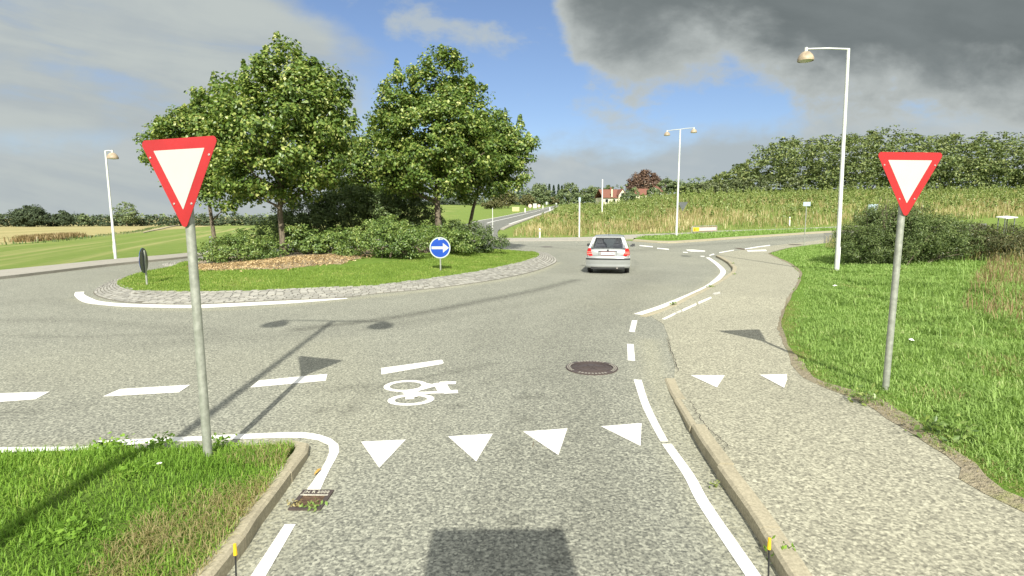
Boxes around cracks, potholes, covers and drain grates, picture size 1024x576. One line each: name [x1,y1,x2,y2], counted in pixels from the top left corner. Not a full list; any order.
manhole cover [566,361,618,375]
